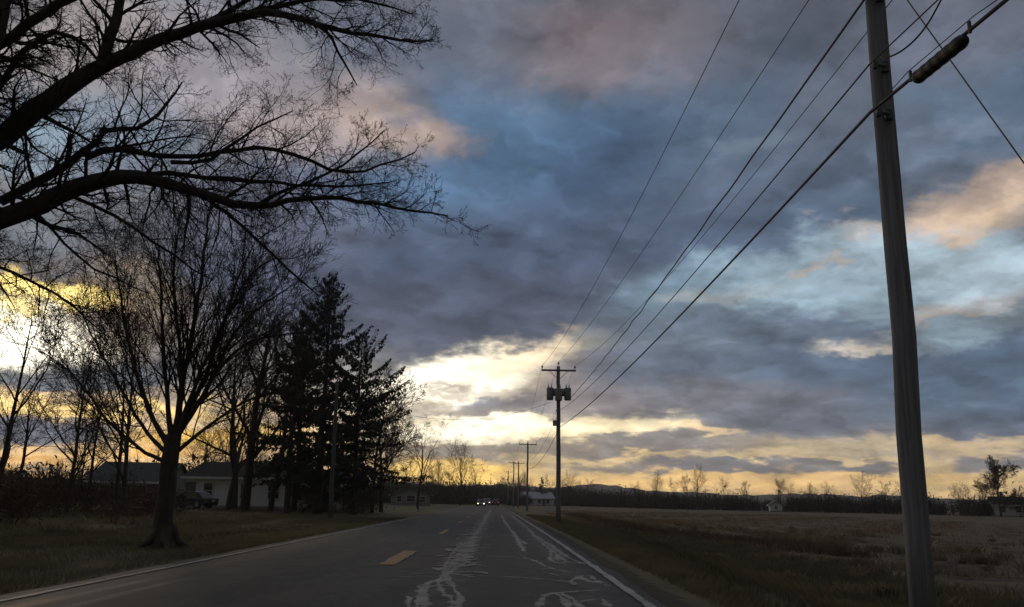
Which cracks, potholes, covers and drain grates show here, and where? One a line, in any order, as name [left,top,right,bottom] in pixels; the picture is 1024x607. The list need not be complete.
crack [402,510,613,607]
